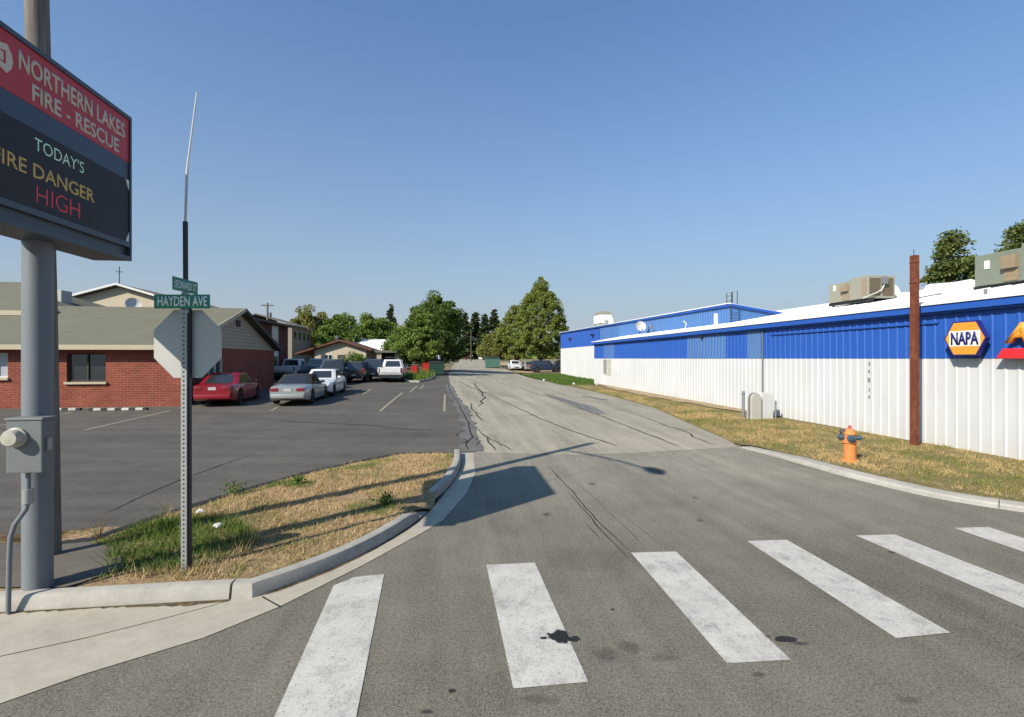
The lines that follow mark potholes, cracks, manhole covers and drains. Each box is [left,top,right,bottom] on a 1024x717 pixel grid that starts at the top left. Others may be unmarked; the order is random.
crack [552,470,661,558]
crack [448,381,715,451]
